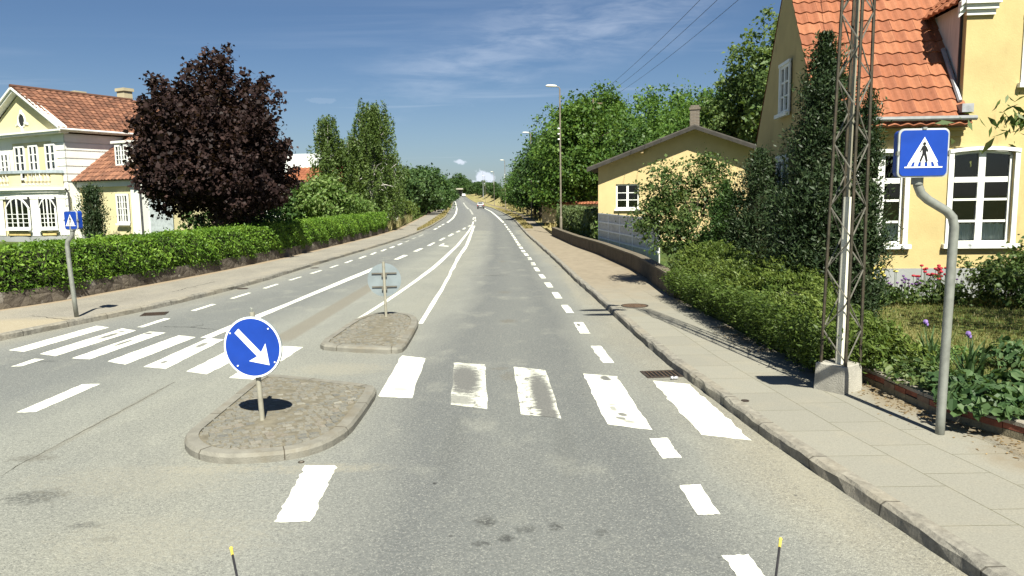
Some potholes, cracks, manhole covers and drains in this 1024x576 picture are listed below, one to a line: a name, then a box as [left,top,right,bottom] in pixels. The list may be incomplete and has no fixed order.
drain grate [640,370,683,378]
